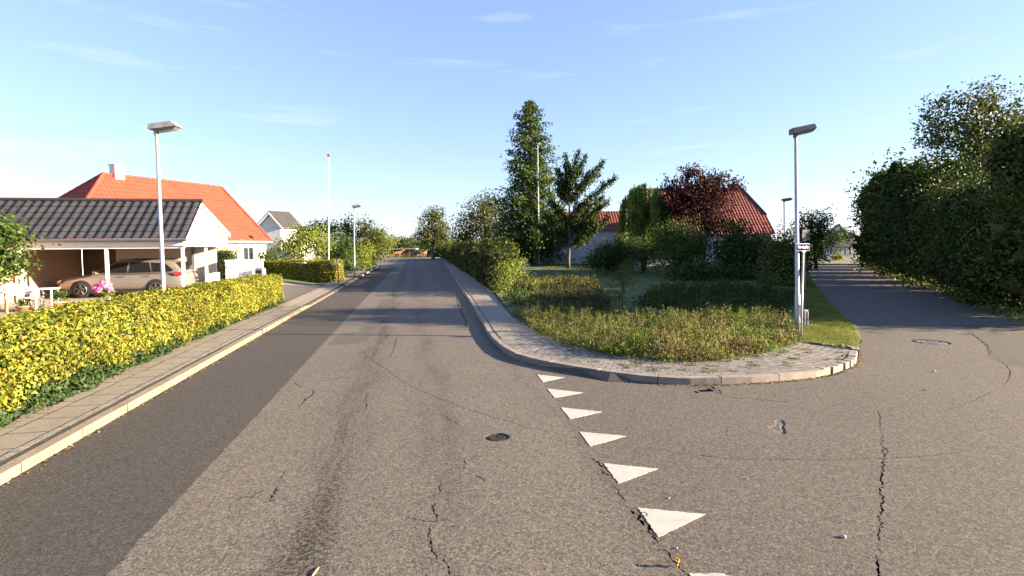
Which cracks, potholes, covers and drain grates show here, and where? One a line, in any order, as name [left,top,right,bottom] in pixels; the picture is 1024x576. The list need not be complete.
crack [360,338,990,576]
pothole [768,419,786,435]
crack [240,451,299,503]
manhole cover [484,433,510,441]
